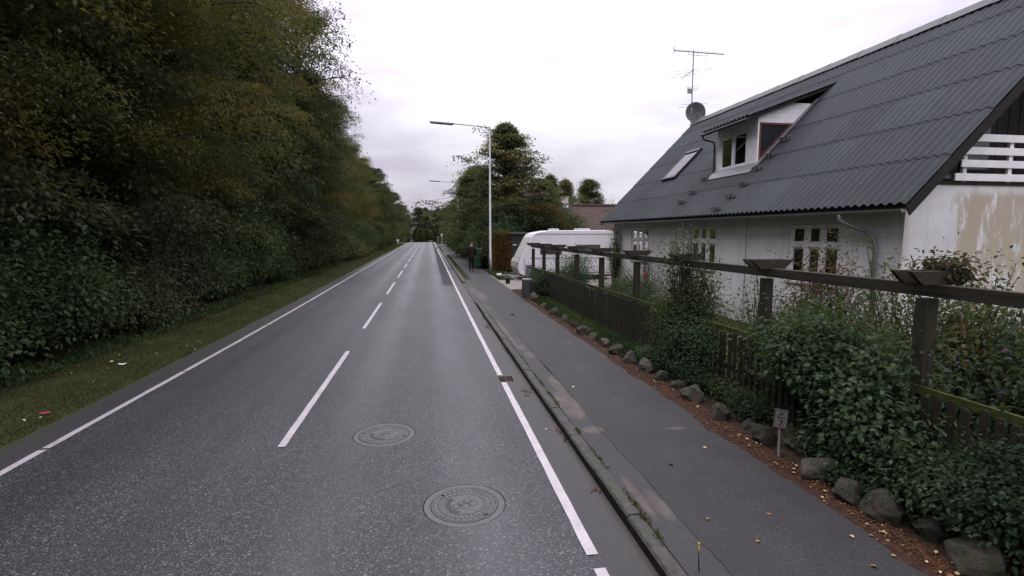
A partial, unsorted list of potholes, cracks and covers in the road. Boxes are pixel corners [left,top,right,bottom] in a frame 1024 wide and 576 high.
manhole cover [423,485,505,528]
manhole cover [353,423,415,447]
drain grate [495,375,517,383]
